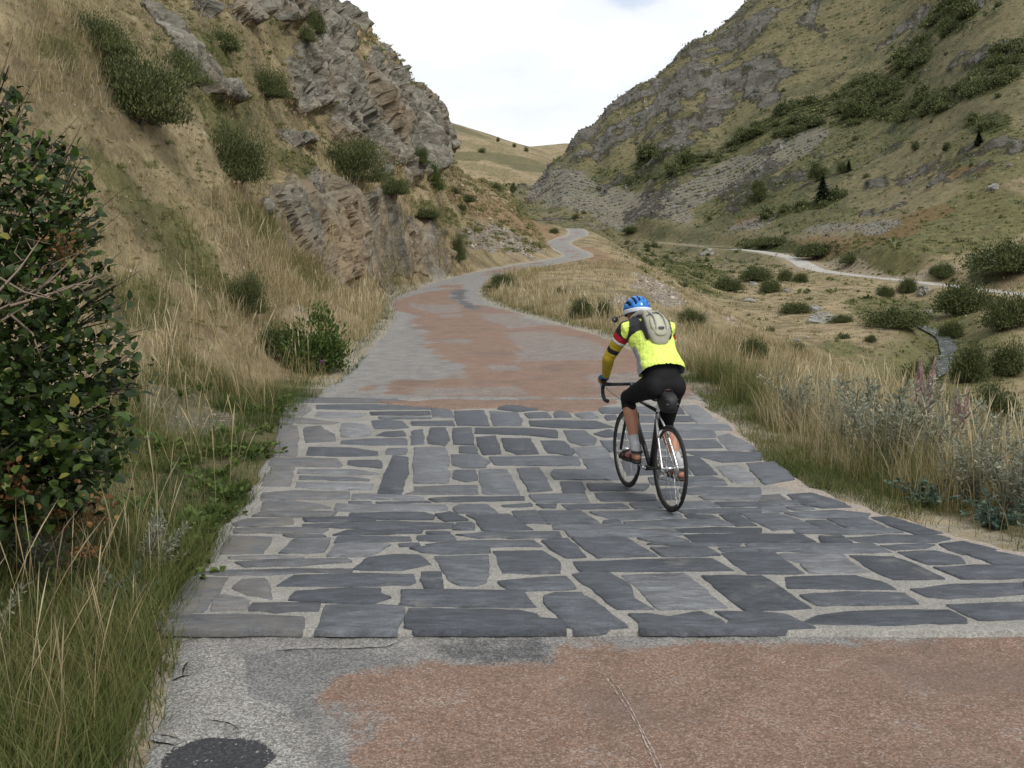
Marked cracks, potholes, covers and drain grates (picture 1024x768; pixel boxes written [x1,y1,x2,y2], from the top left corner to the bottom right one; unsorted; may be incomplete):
crack [277,641,404,654]
crack [172,659,197,680]
crack [598,662,662,768]
